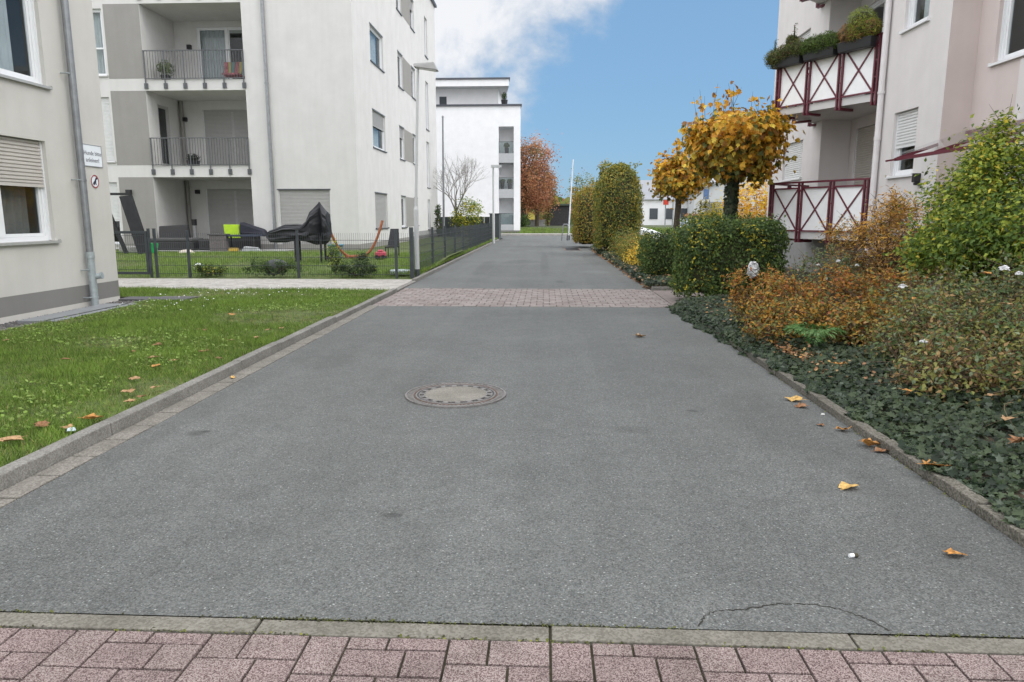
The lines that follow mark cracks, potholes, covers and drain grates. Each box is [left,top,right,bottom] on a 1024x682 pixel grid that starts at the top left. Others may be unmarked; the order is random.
manhole cover [405,382,506,408]
crack [698,603,893,632]
